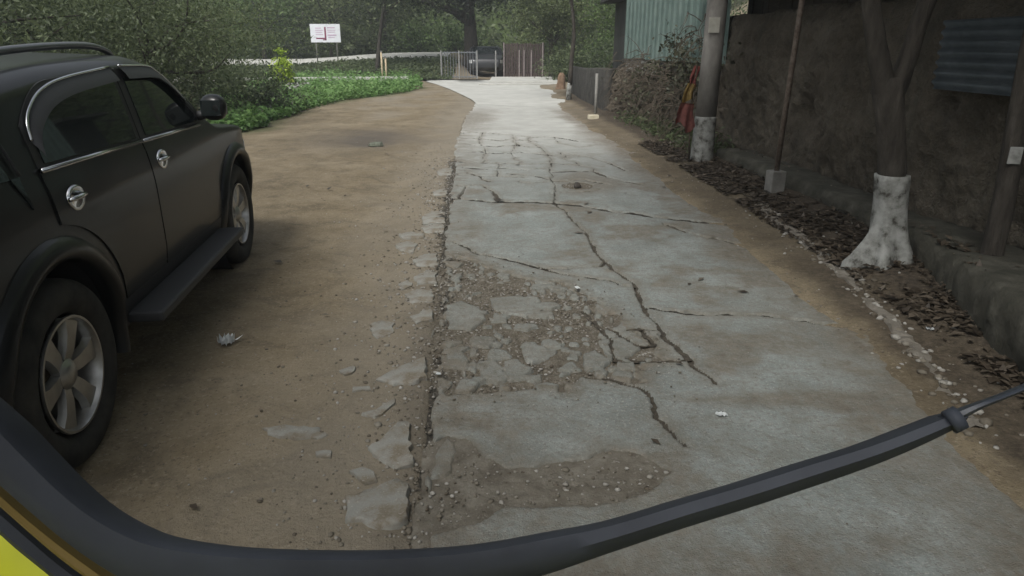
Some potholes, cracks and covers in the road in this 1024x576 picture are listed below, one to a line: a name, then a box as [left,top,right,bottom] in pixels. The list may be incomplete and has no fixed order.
crack [410,132,813,549]
pothole [432,258,663,396]
pothole [411,436,672,549]
